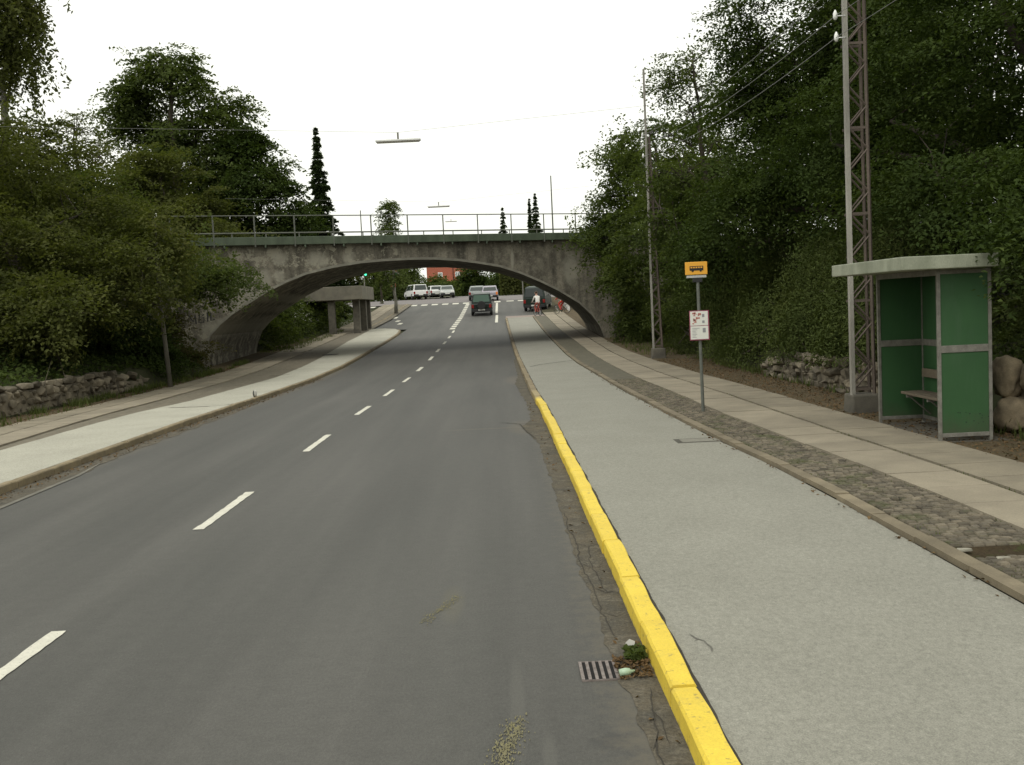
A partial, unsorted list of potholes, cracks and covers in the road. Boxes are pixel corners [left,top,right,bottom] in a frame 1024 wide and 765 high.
drain grate [578,660,620,682]
crack [564,513,621,636]
crack [650,688,669,765]
